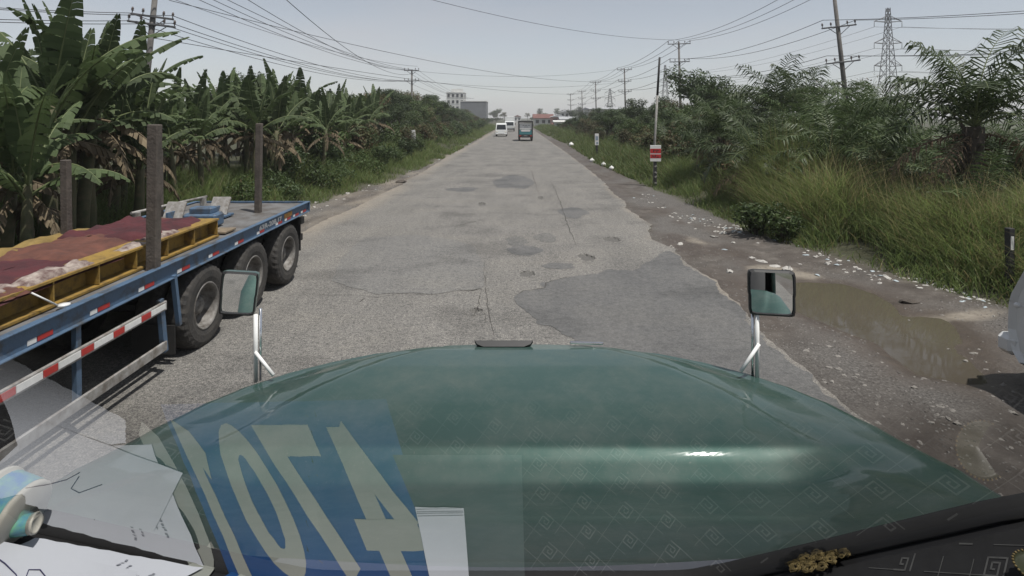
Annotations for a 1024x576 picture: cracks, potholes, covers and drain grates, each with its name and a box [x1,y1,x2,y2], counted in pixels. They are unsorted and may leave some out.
pothole [574,252,601,262]
pothole [514,269,541,278]
crack [345,288,486,320]
